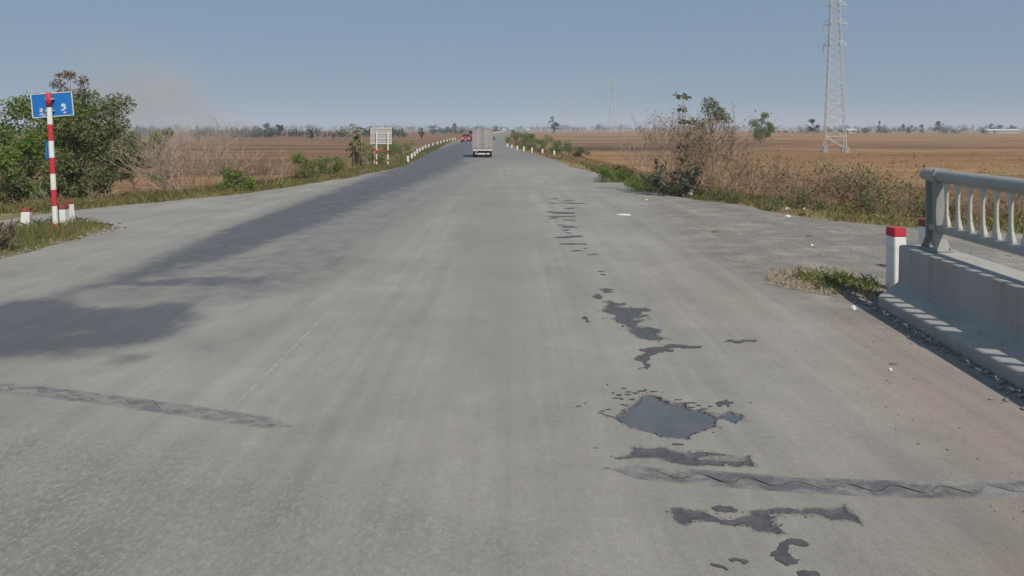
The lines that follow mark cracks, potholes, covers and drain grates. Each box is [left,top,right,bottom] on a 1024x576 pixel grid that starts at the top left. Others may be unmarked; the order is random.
pothole [578,384,752,440]
